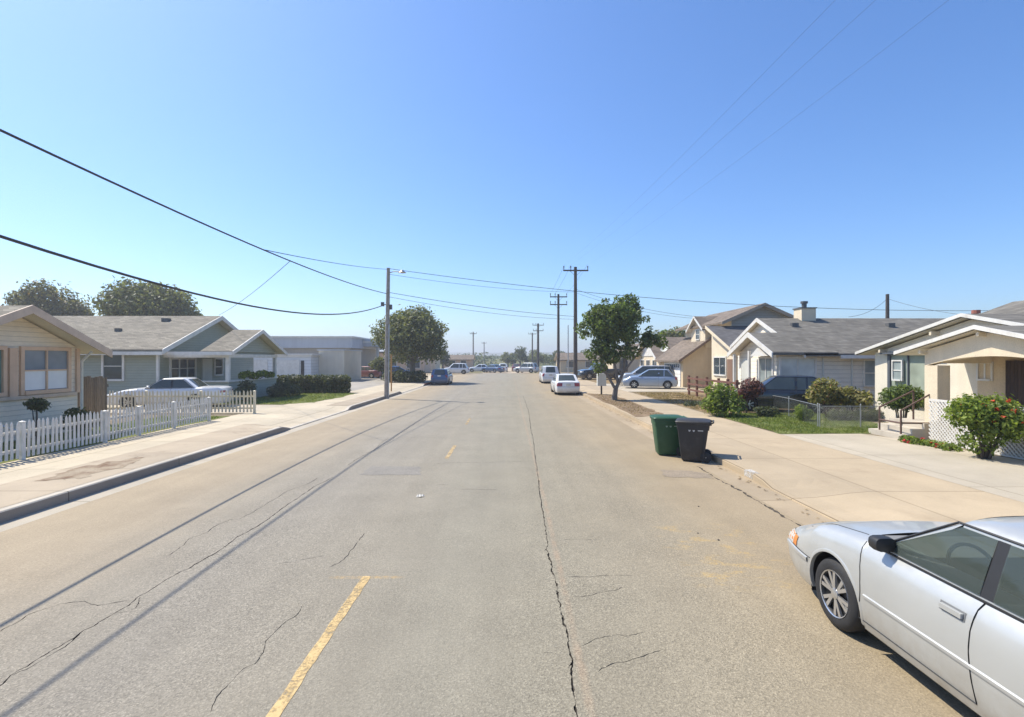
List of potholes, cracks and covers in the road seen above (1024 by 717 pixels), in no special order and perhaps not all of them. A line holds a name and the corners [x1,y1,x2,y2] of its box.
crack [697,466,801,526]
crack [585,632,660,686]
crack [211,605,303,710]
crack [0,477,333,686]
